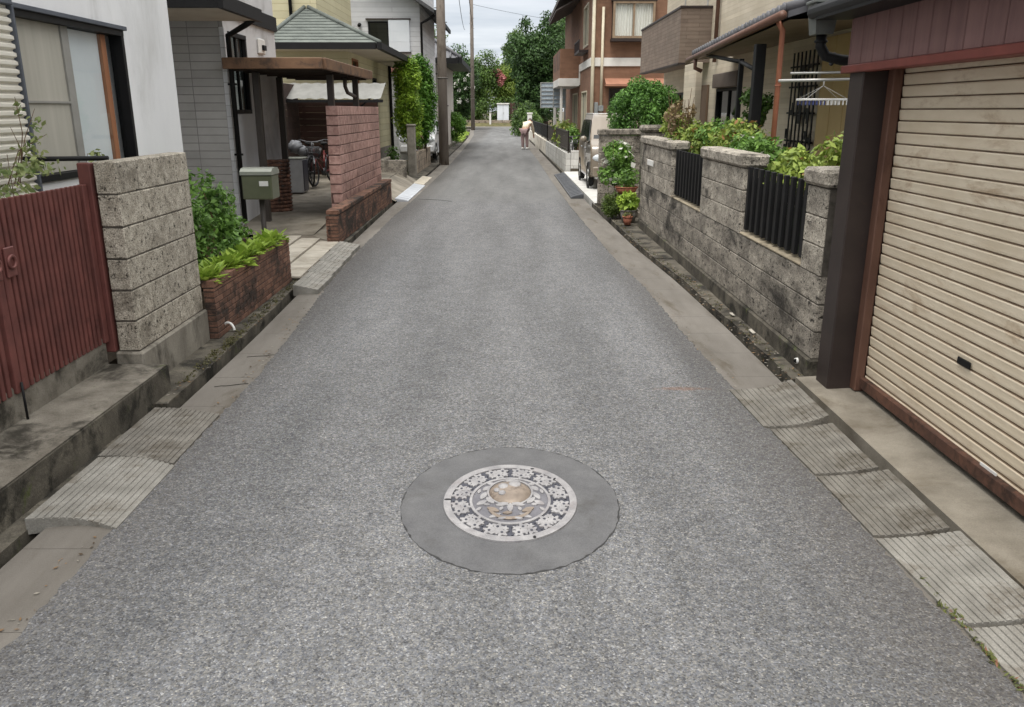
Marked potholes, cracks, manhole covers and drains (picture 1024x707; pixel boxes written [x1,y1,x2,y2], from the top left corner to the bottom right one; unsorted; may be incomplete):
manhole cover [400,447,620,575]
